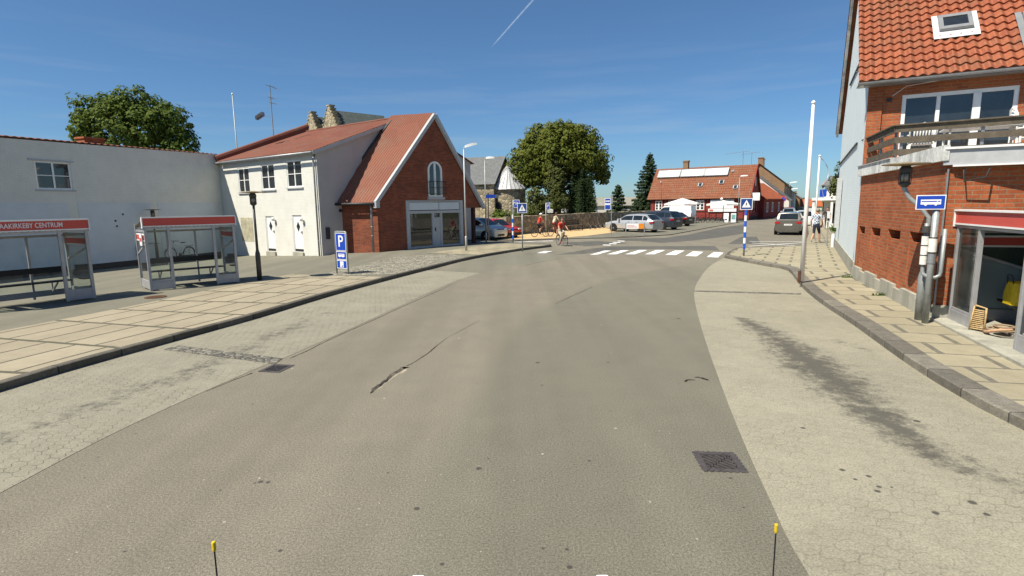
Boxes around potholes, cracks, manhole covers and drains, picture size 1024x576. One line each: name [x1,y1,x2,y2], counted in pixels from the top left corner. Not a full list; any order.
drain grate [258,364,294,373]
crack [370,322,476,394]
drain grate [692,451,749,473]
